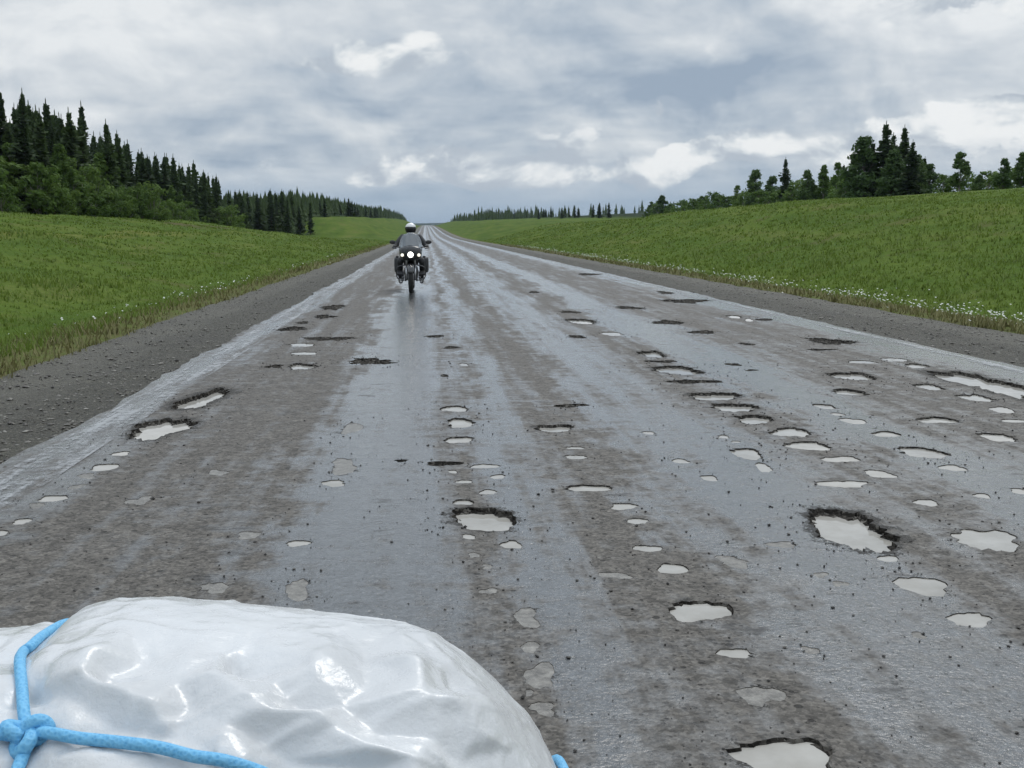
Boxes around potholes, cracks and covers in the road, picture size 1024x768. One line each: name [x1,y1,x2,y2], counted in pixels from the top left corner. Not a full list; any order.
pothole [892,577,948,597]
pothole [954,394,994,402]
pothole [649,366,706,375]
pothole [950,529,1021,552]
pothole [807,508,901,553]
pothole [128,418,198,441]
pothole [171,387,231,410]
pothole [924,370,1024,399]
pothole [945,612,993,628]
pothole [668,601,734,622]
pothole [725,737,832,768]
pothole [533,424,574,432]
